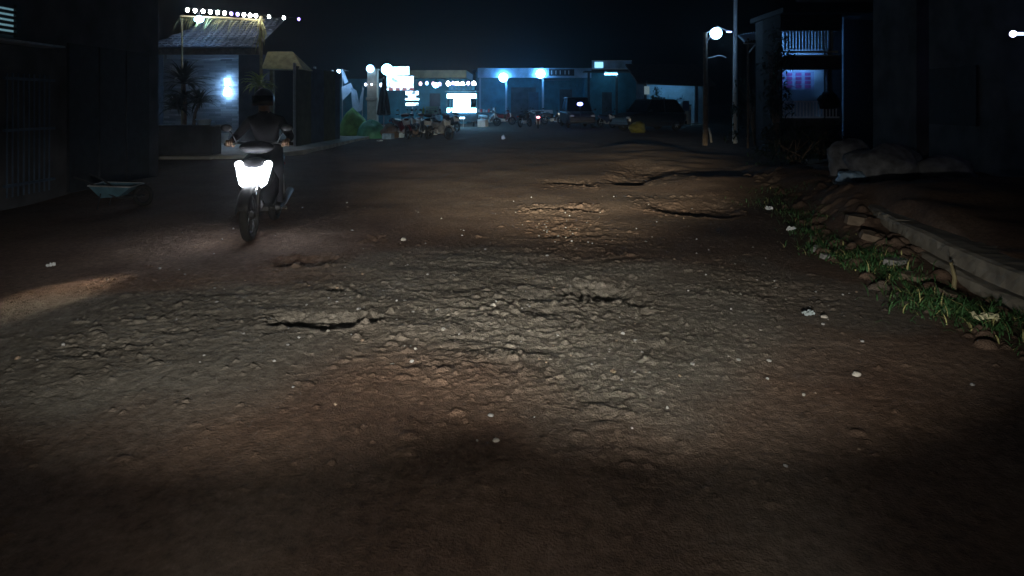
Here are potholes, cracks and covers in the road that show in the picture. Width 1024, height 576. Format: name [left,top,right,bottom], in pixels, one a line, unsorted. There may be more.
pothole [266,252,347,268]
pothole [554,277,672,317]
pothole [519,203,606,213]
pothole [263,308,389,331]
